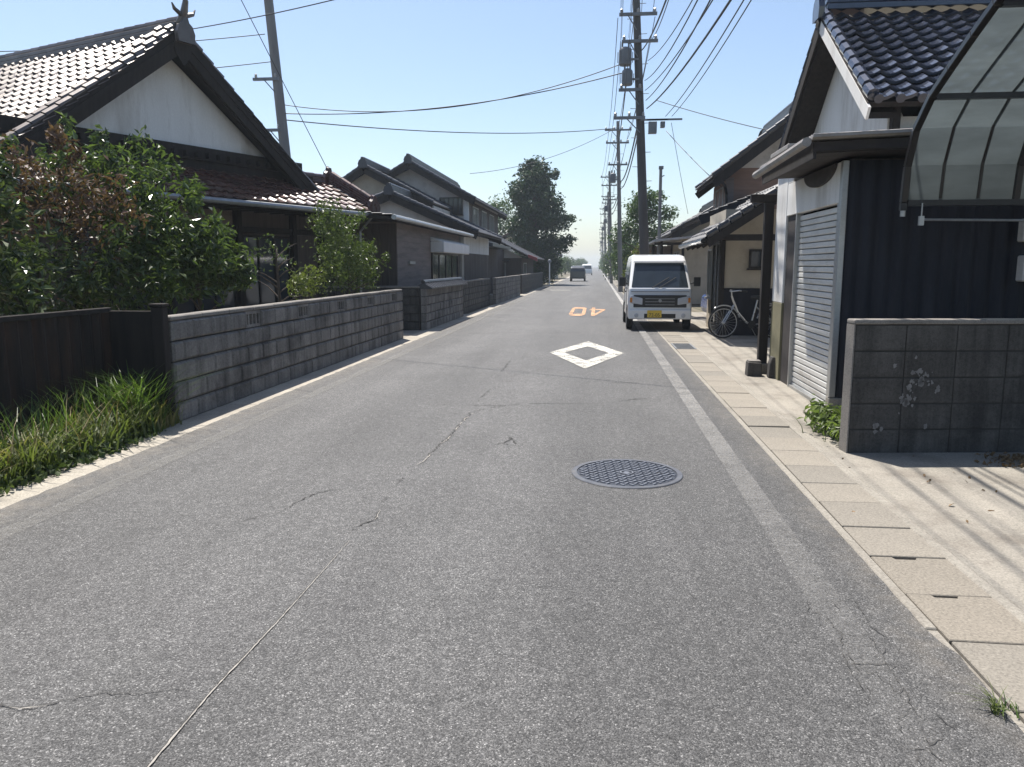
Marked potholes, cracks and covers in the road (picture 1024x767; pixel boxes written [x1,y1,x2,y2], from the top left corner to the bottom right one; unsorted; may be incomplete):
manhole cover [571,459,683,489]
crack [807,597,953,765]
crack [0,688,184,709]
